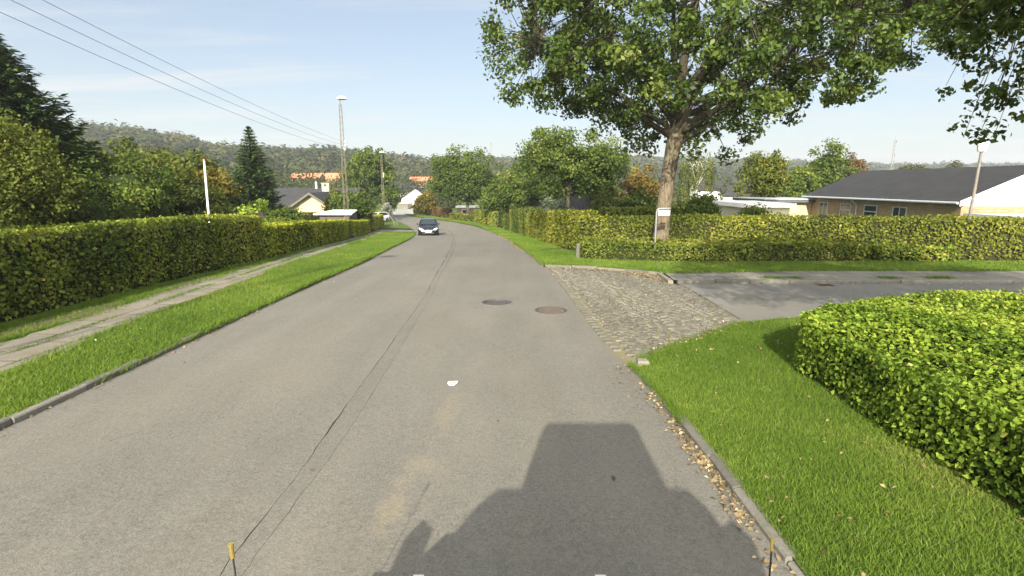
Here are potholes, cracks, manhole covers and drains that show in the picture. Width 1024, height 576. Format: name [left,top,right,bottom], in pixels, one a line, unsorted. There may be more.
manhole cover [535,306,567,314]
